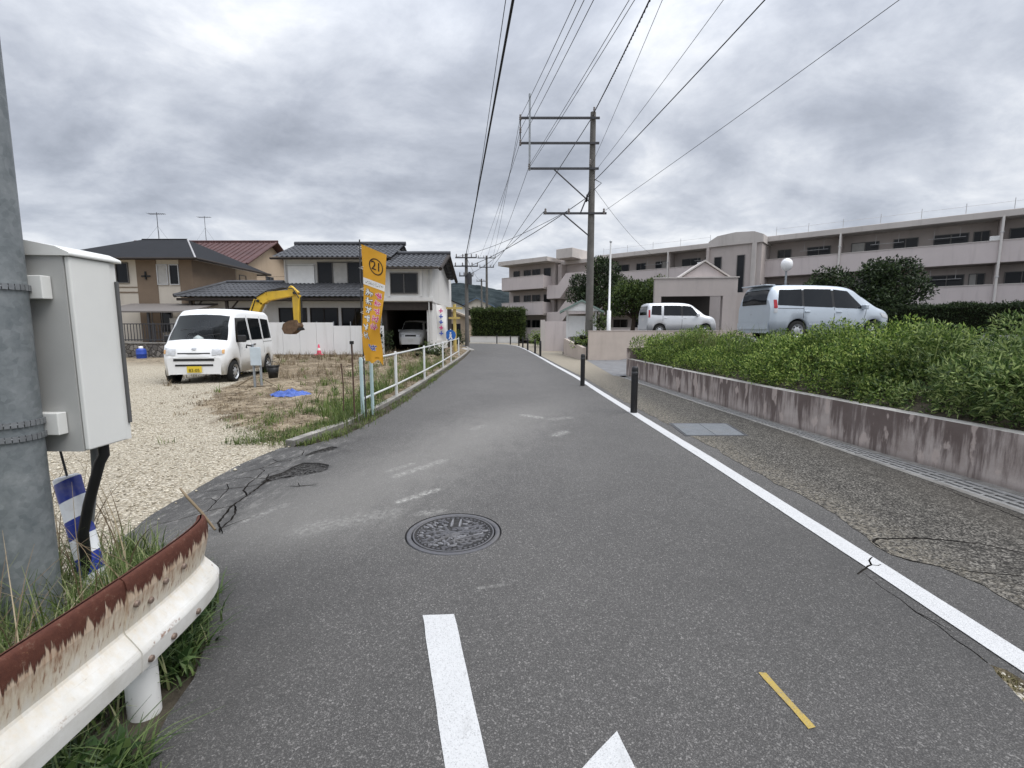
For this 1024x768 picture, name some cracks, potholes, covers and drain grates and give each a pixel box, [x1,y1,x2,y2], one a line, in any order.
crack [151,449,304,534]
utility cover [669,423,748,436]
crack [857,537,1021,663]
pothole [991,665,1024,700]
pothole [261,463,329,484]
manhole cover [405,513,502,556]
